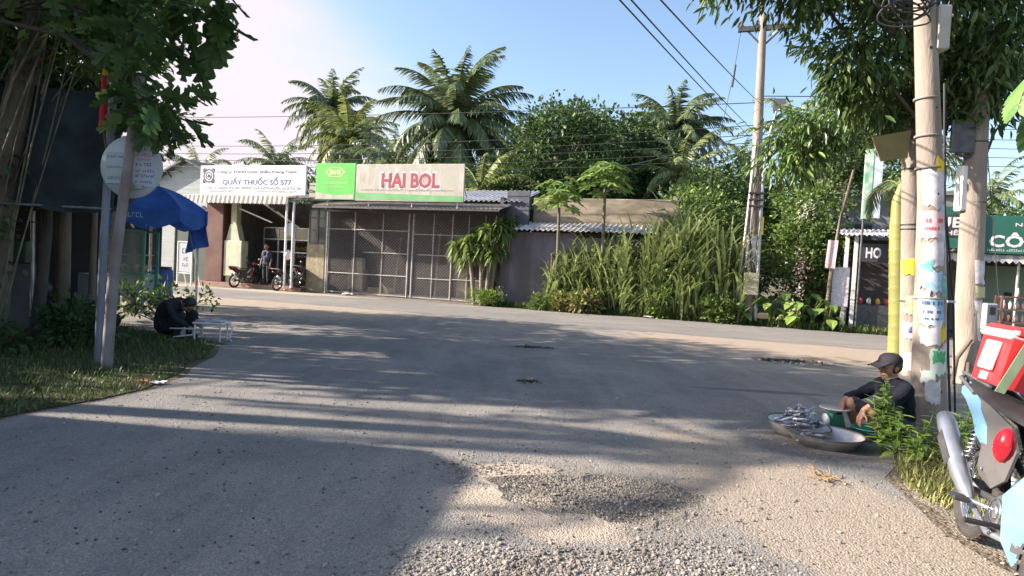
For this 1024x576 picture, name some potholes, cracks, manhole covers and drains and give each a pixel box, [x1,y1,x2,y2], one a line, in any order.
pothole [514,377,542,385]
pothole [747,357,837,367]
pothole [478,473,722,532]
